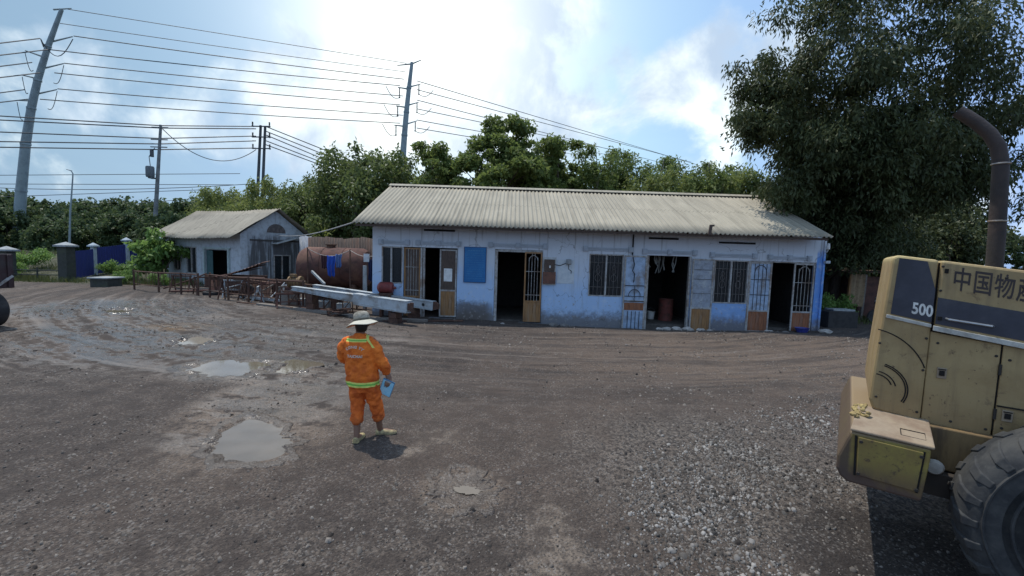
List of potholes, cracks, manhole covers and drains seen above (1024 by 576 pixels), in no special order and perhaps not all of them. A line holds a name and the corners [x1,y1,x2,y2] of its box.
pothole [424,462,507,517]
pothole [189,410,311,470]
pothole [166,357,288,383]
pothole [169,333,224,347]
pothole [249,357,331,376]
